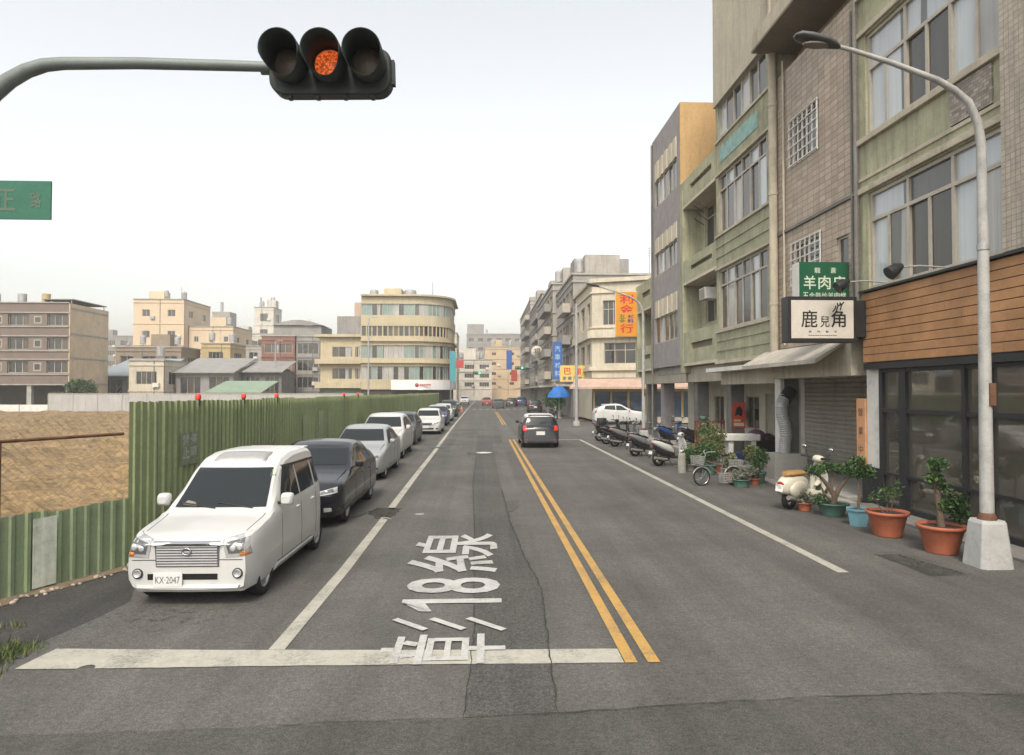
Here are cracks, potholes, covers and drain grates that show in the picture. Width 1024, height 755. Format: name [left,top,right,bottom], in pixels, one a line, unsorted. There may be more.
crack [501,489,558,710]
